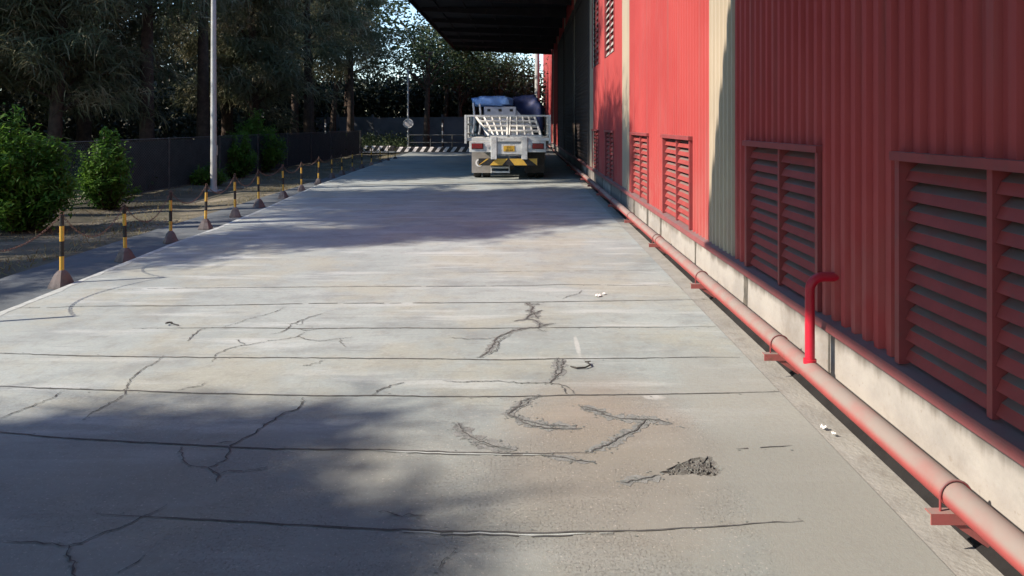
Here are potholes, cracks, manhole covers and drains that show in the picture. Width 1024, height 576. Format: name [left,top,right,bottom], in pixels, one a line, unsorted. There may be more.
crack [445,292,684,464]
crack [178,397,305,482]
crack [6,504,167,576]
crack [84,356,163,420]
crack [213,308,350,359]
pothole [661,456,724,477]
